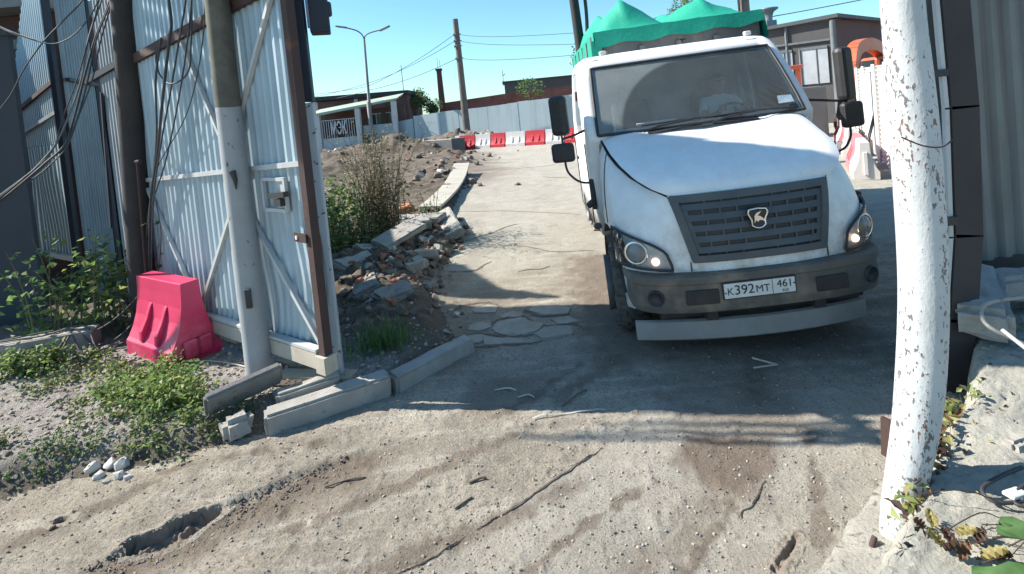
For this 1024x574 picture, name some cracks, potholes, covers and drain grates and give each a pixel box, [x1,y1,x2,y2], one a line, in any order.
crack [397,536,465,574]
pothole [761,529,811,574]
pothole [110,499,236,563]
crack [741,480,766,519]
crack [464,224,593,272]
crack [444,301,584,347]
